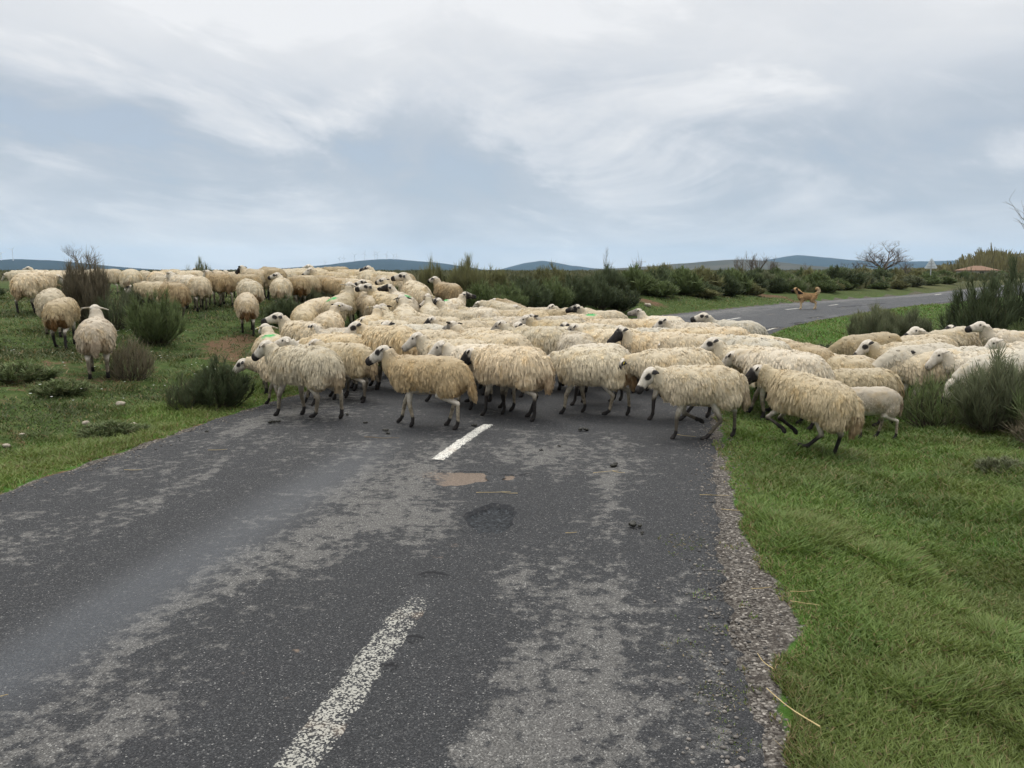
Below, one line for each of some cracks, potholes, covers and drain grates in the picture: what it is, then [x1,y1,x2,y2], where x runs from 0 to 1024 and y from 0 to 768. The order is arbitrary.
pothole [452,500,528,538]
